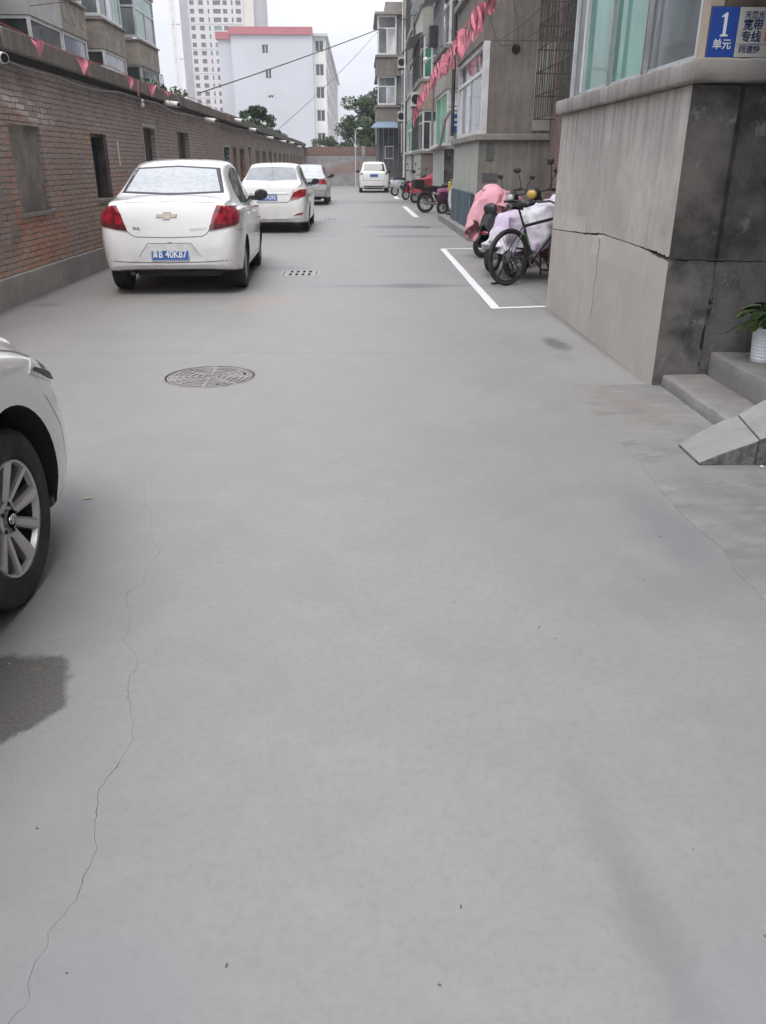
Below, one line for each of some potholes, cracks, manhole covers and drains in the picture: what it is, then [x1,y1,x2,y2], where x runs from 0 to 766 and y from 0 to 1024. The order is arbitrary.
crack [8,483,160,1024]
manhole cover [163,366,257,388]
